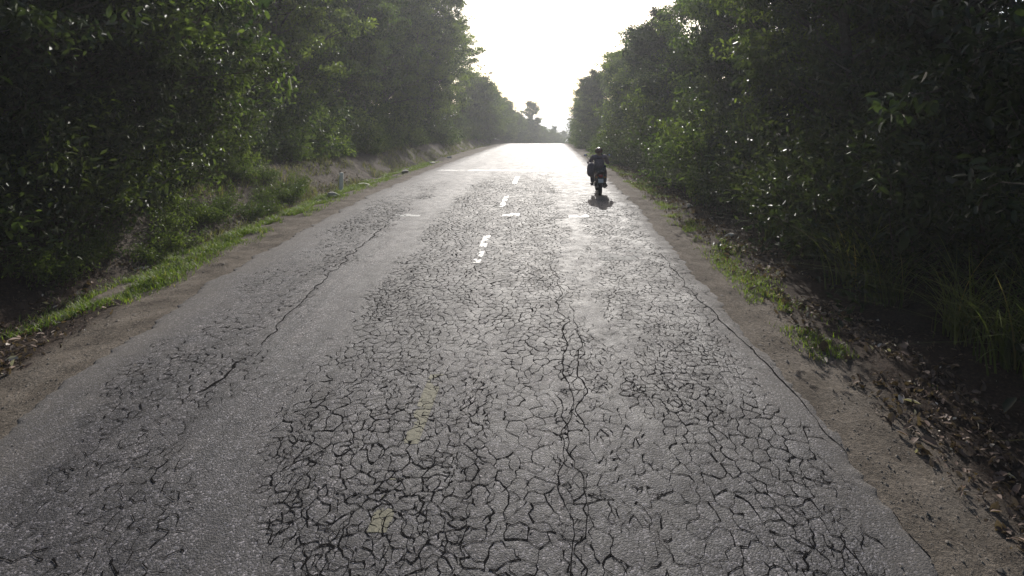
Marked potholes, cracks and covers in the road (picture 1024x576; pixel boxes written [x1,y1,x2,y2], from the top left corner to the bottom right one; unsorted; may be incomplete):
crack [239,167,931,576]
crack [0,182,445,576]
